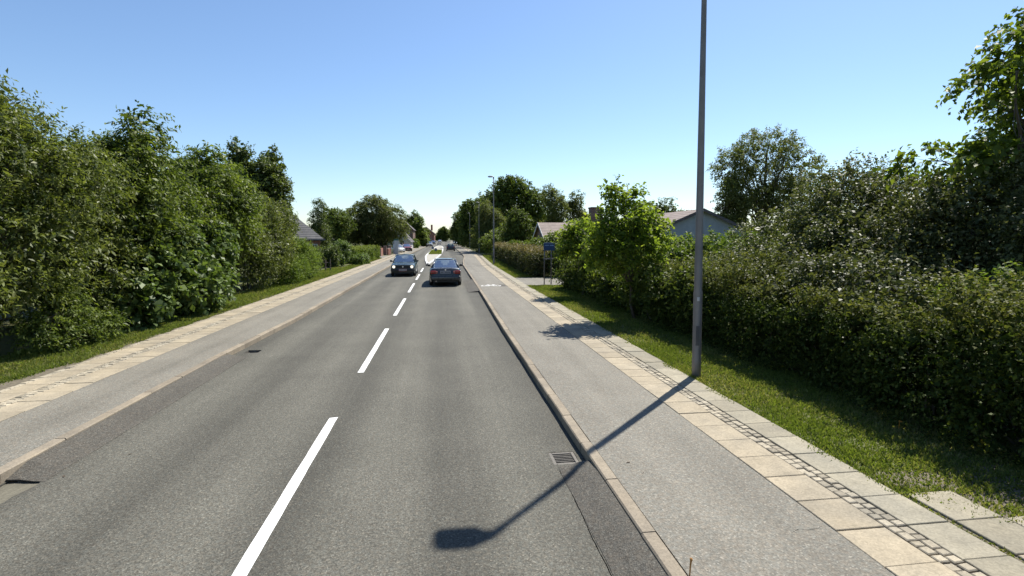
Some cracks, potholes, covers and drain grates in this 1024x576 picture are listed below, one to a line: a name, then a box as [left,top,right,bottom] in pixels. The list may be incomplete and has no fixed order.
drain grate [548,452,579,465]
